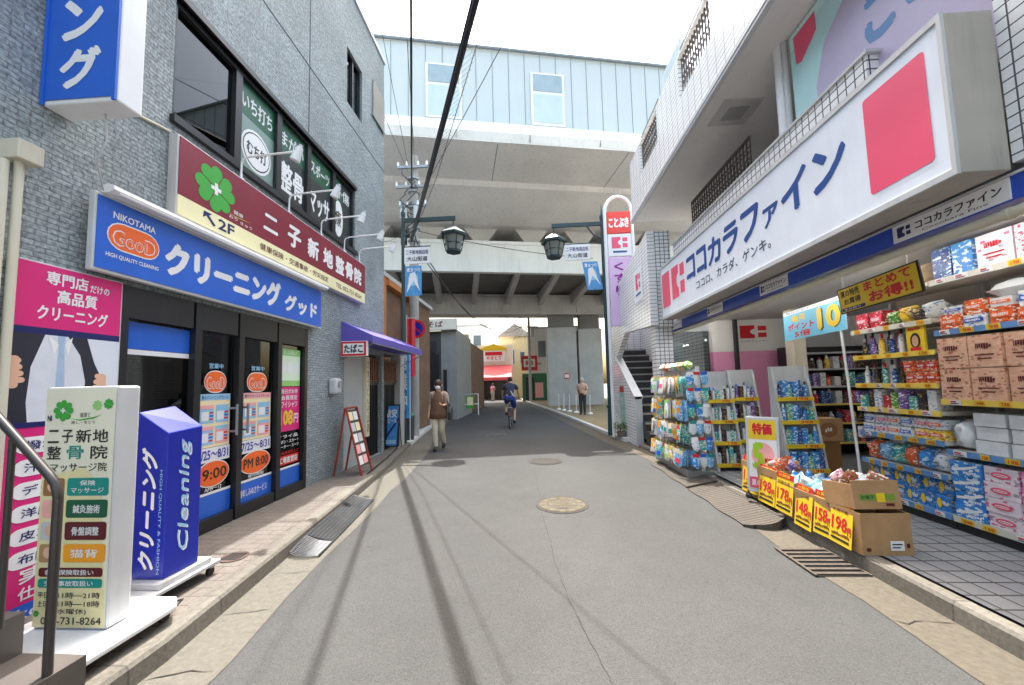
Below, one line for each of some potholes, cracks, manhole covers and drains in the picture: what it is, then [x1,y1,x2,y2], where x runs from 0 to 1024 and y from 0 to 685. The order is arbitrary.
drain grate [774,547,873,577]
utility cover [220,551,249,562]
crack [543,519,613,685]
drain grate [289,495,374,557]
manhole cover [536,496,589,514]
